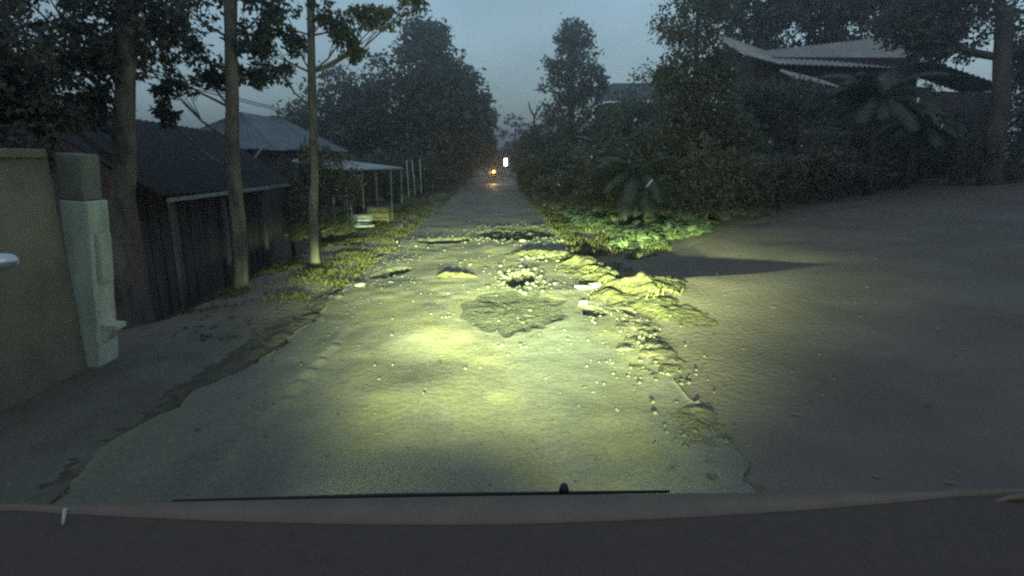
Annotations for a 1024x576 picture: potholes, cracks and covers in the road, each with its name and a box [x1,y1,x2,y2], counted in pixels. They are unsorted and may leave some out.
pothole [411,237,479,245]
pothole [473,226,564,242]
pothole [496,270,543,289]
pothole [560,303,617,319]
